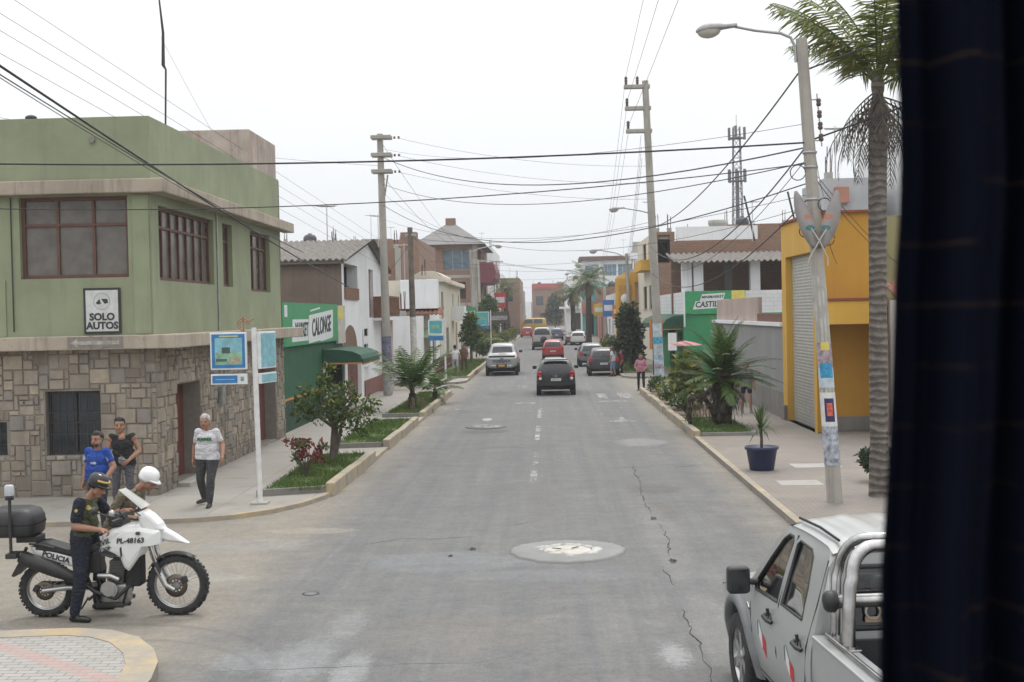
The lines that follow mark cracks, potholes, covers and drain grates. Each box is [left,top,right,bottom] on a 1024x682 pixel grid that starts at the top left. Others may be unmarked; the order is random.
crack [615,464,712,682]
manhole cover [510,540,626,564]
